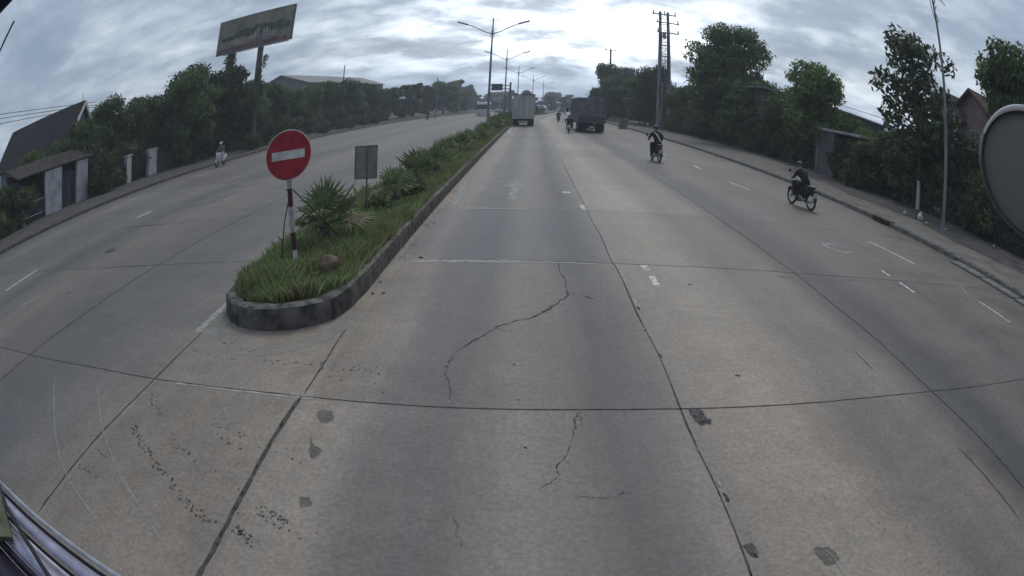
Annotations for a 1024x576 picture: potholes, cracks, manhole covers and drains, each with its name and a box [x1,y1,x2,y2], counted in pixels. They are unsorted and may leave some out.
crack [444,263,590,403]
pothole [816,545,838,565]
crack [540,412,582,496]
pothole [743,543,759,557]
pothole [689,408,711,425]
